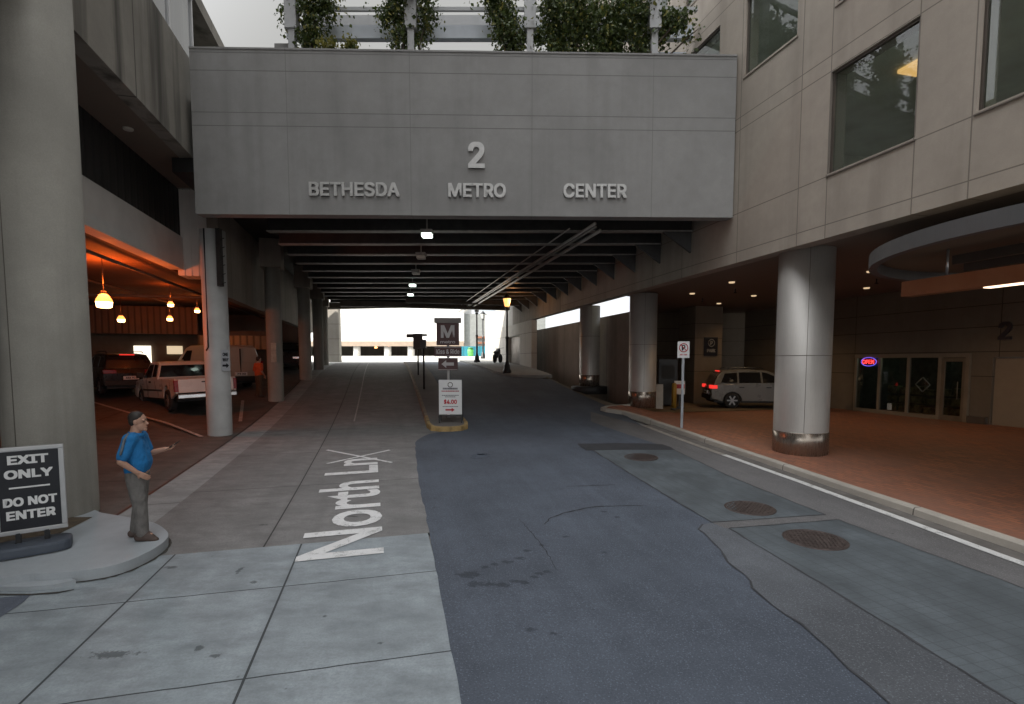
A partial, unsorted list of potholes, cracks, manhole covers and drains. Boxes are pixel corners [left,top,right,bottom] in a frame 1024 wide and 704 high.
manhole cover [724,501,777,516]
crack [519,505,640,567]
manhole cover [782,529,850,551]
manhole cover [624,453,658,461]
